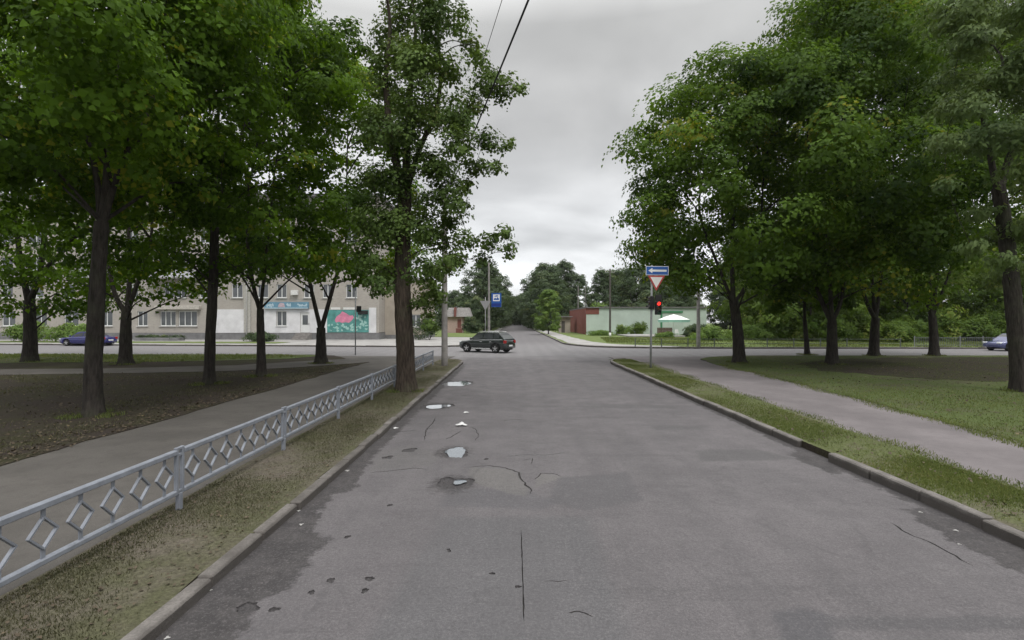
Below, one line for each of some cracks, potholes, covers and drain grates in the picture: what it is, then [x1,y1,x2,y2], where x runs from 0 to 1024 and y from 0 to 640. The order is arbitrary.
crack [475,452,563,493]
crack [890,522,973,566]
pothole [437,477,475,490]
pothole [236,601,261,614]
